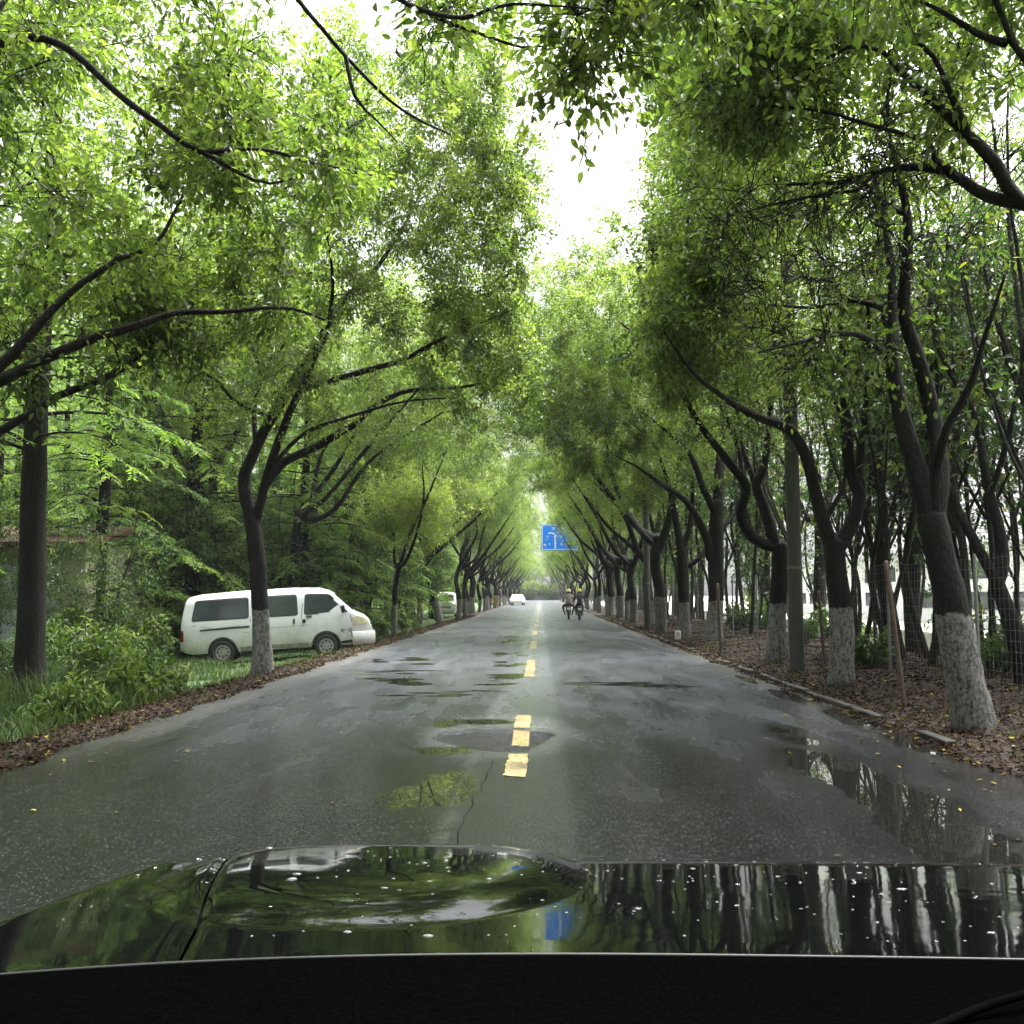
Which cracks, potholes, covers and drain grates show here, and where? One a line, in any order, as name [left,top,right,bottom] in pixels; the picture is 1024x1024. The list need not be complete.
crack [457,760,493,844]
pothole [431,729,557,752]
